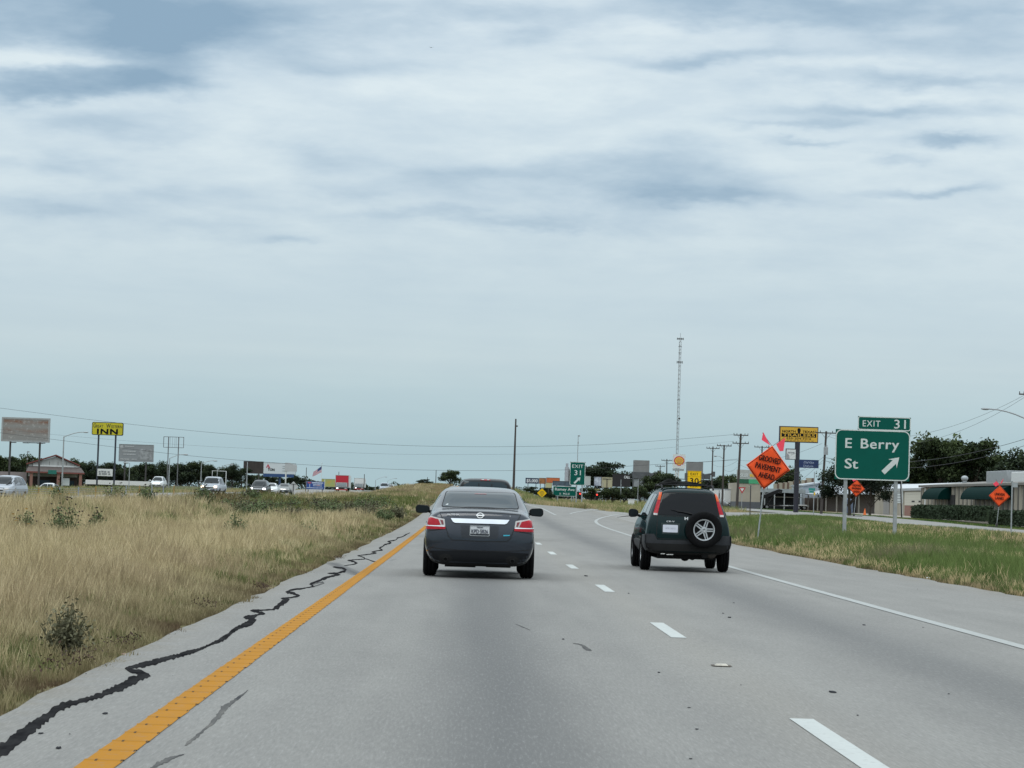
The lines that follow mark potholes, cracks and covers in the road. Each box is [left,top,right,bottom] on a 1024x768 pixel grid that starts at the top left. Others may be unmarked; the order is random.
crack [0,533,409,768]
